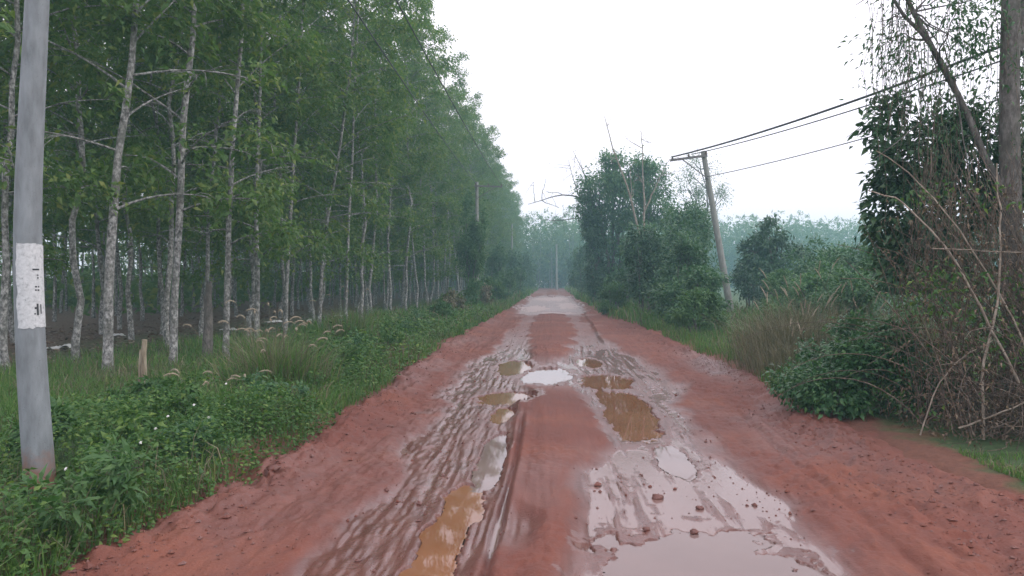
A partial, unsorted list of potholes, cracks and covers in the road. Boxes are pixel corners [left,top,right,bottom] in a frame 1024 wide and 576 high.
pothole [577,374,635,390]
pothole [496,361,534,377]
pothole [469,432,509,493]
pothole [490,408,515,424]
pothole [399,466,486,576]
pothole [519,367,573,385]
pothole [575,358,603,369]
pothole [475,391,532,406]
pothole [652,445,697,481]
pothole [595,389,664,444]
